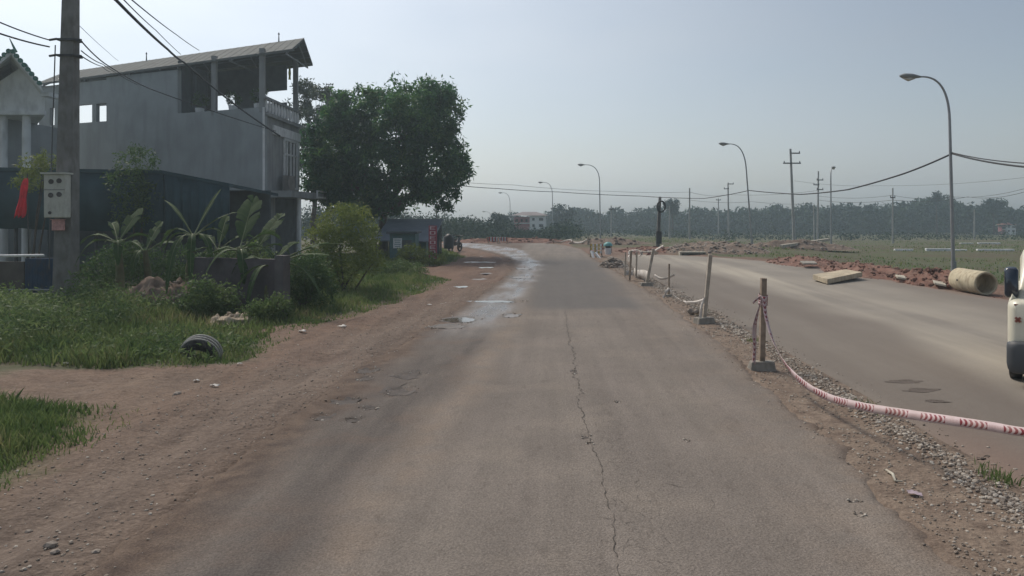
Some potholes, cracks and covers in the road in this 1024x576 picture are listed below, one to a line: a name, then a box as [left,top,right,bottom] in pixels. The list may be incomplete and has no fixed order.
pothole [325,397,367,405]
crack [565,311,682,576]
pothole [379,386,419,396]
pothole [390,369,429,380]
pothole [439,315,483,325]
